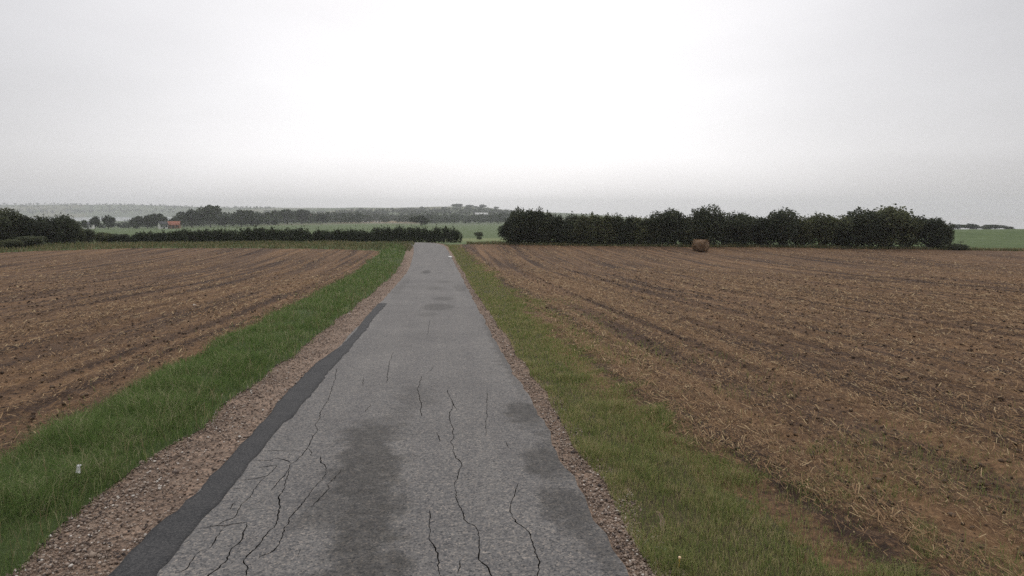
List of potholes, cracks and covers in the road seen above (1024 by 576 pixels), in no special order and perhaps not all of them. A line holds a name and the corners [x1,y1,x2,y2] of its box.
crack [509,484,541,576]
crack [417,369,492,576]
crack [177,370,341,576]
